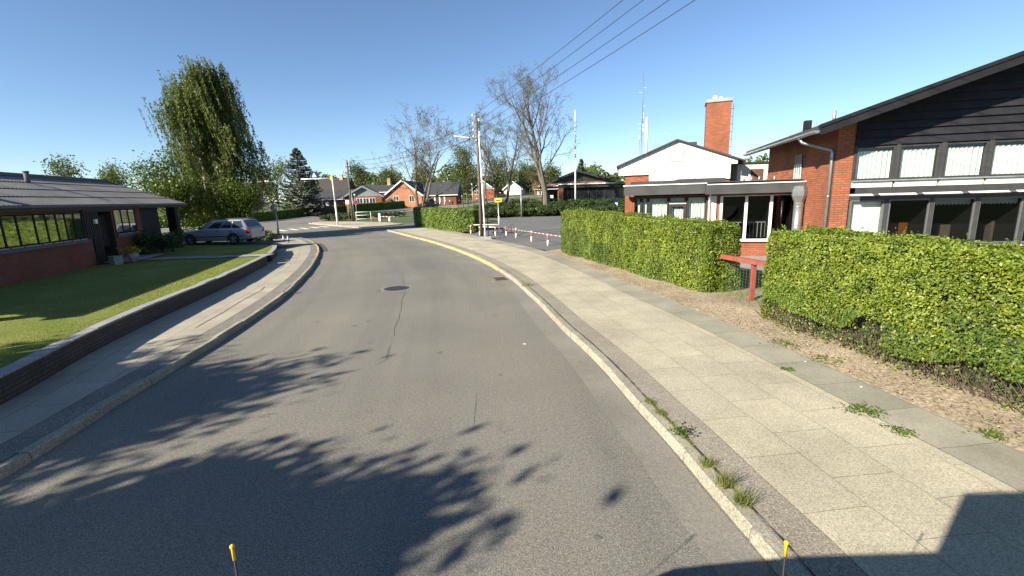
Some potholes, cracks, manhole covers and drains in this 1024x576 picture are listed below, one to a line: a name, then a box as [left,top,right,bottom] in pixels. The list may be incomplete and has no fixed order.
crack [374,264,446,366]
